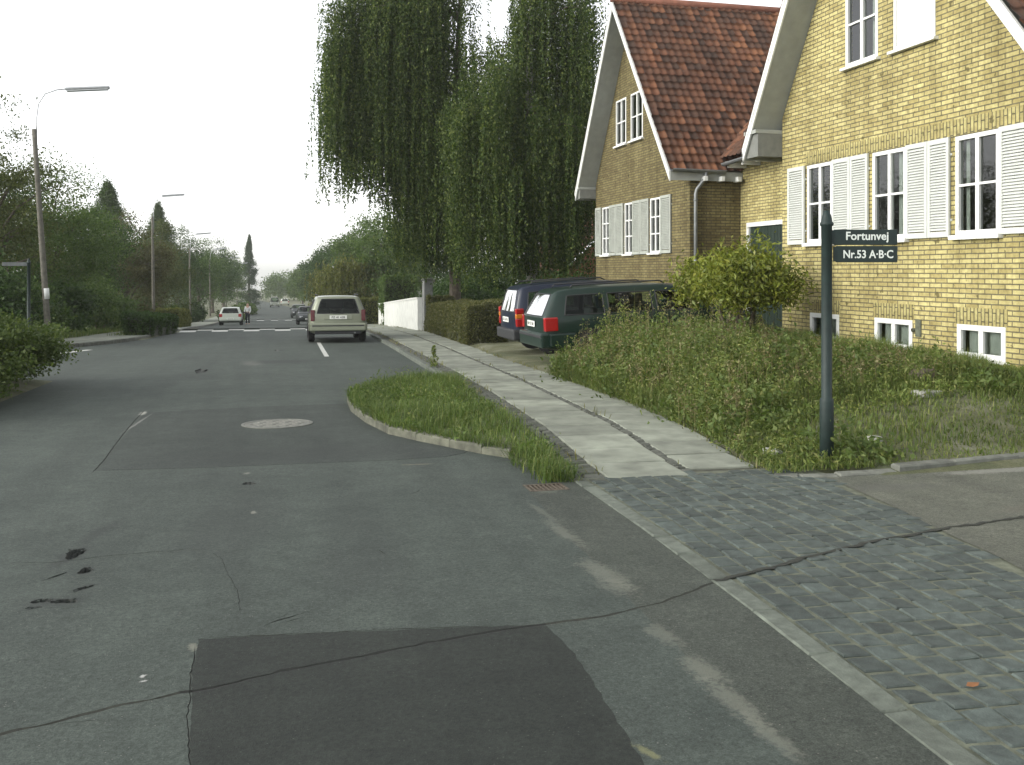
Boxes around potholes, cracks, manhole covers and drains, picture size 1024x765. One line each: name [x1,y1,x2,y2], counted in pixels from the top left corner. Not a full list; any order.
pothole [65,548,86,560]
manhole cover [241,419,313,429]
drain grate [523,483,570,492]
crack [0,516,1024,765]
crack [94,411,468,471]
